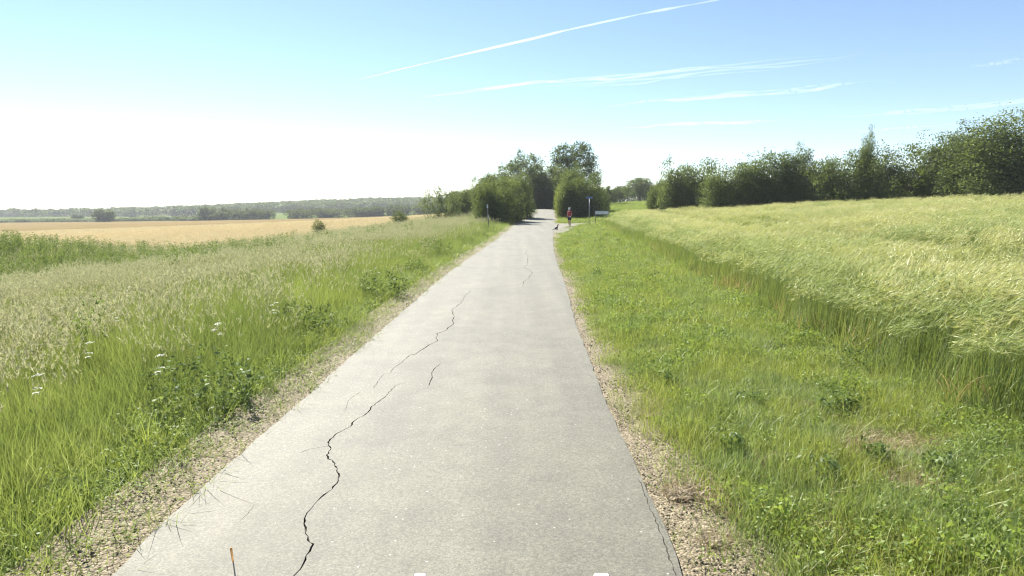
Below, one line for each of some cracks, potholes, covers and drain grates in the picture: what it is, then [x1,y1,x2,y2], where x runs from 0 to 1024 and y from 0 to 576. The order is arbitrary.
crack [293,302,462,576]
